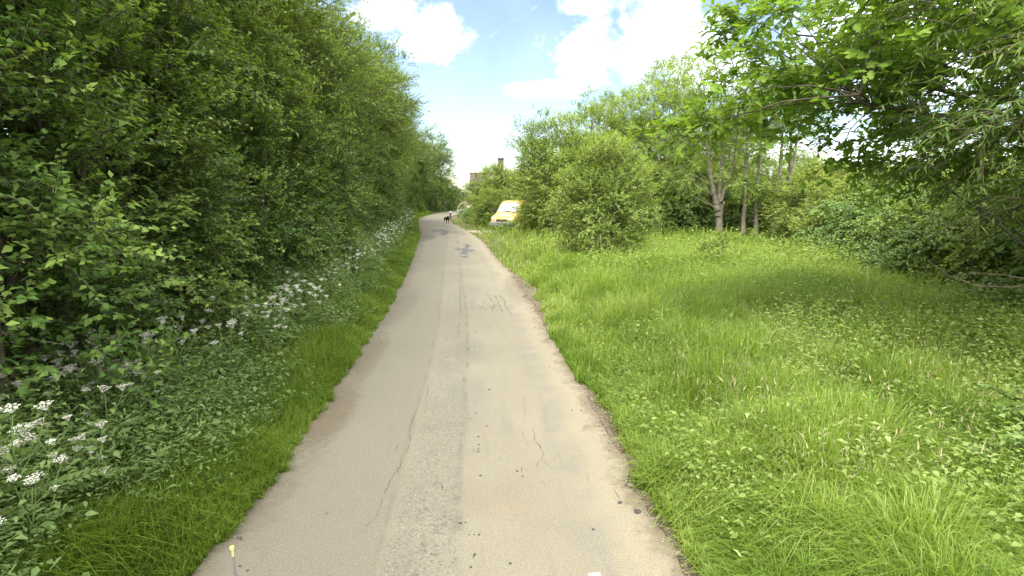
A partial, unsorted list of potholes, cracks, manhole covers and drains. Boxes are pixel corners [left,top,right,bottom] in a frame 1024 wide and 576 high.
crack [367,385,429,526]
